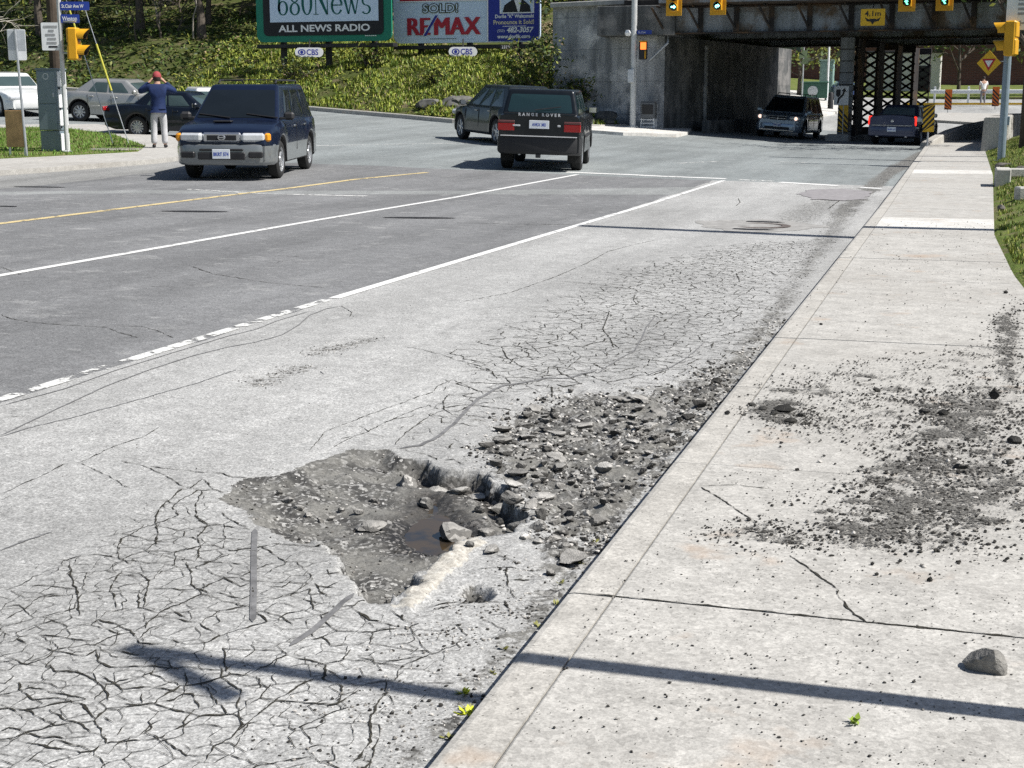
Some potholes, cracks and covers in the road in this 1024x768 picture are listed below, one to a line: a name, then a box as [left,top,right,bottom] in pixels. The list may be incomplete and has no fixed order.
pothole [469,319,789,604]
crack [310,238,836,464]
pothole [215,447,533,606]
crack [0,428,544,768]
manhole cover [695,219,830,232]
